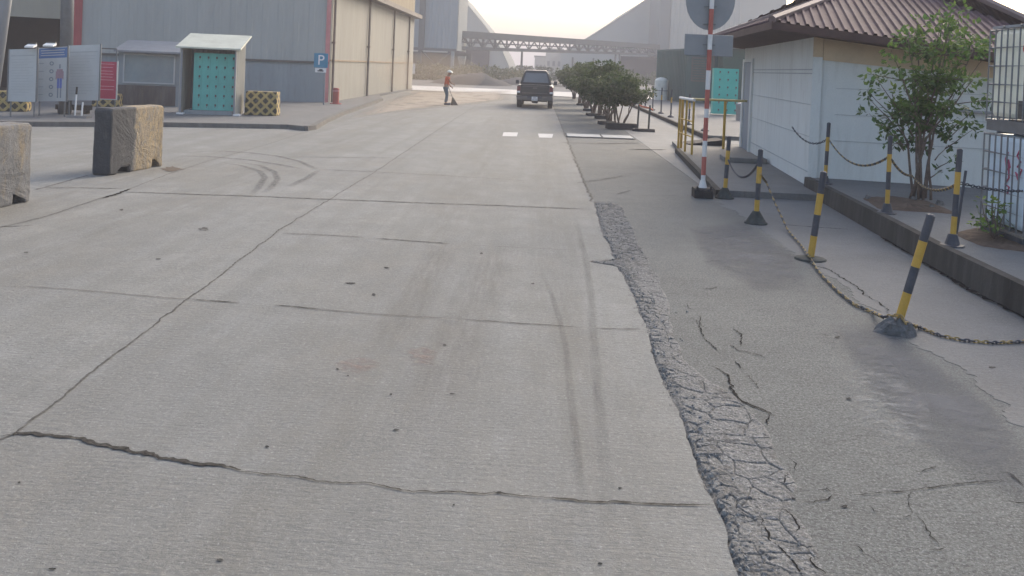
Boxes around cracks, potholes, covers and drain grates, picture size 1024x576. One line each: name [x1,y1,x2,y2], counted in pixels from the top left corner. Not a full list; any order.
crack [3,175,832,576]
crack [850,467,1023,550]
